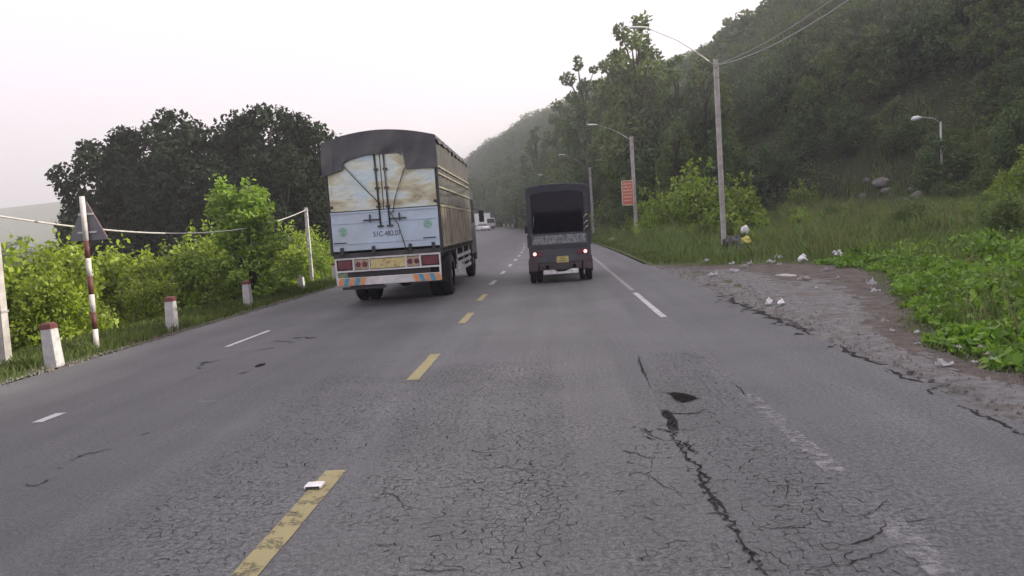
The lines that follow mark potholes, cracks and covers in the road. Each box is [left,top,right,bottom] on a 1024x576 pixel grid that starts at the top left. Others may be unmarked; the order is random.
crack [958,405,1024,436]
crack [706,284,945,395]
pothole [661,409,679,431]
crack [62,349,989,576]
pothole [667,392,700,403]
